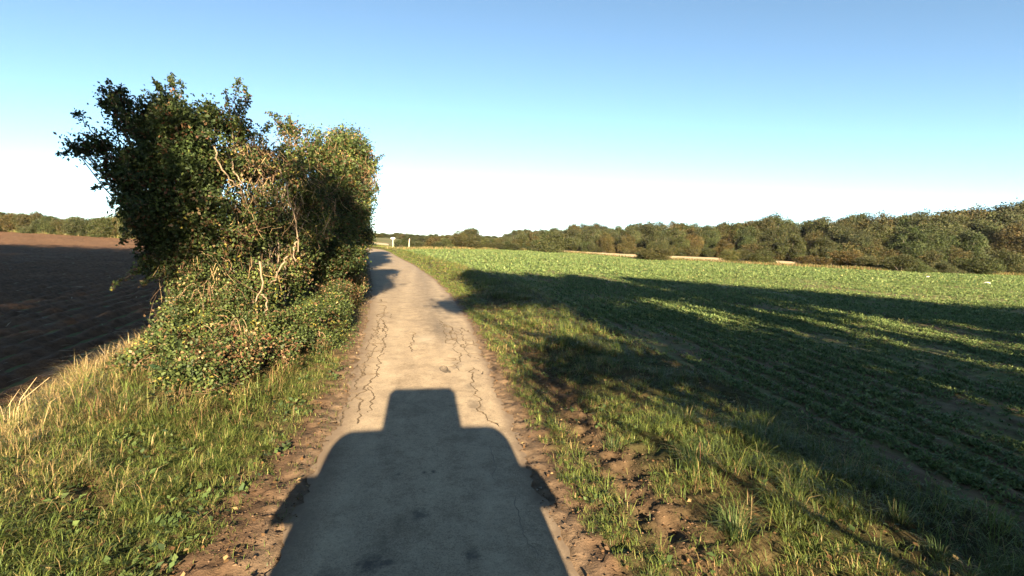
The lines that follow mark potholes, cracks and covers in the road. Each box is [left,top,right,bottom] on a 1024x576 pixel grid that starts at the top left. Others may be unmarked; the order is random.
crack [440,321,499,426]
crack [330,299,416,431]
crack [514,497,539,558]
